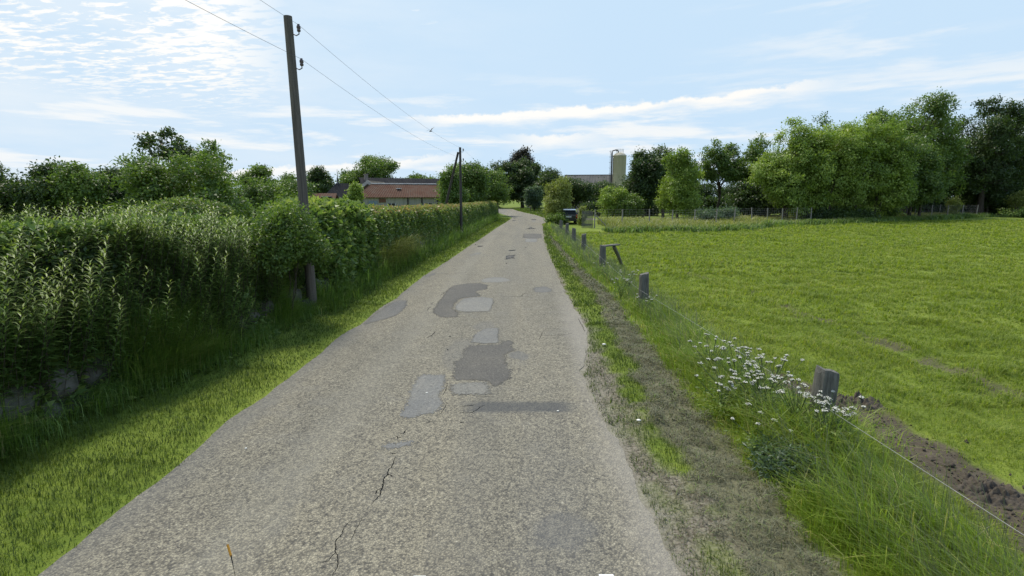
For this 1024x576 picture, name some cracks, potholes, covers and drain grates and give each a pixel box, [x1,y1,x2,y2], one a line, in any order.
crack [320,431,405,576]
